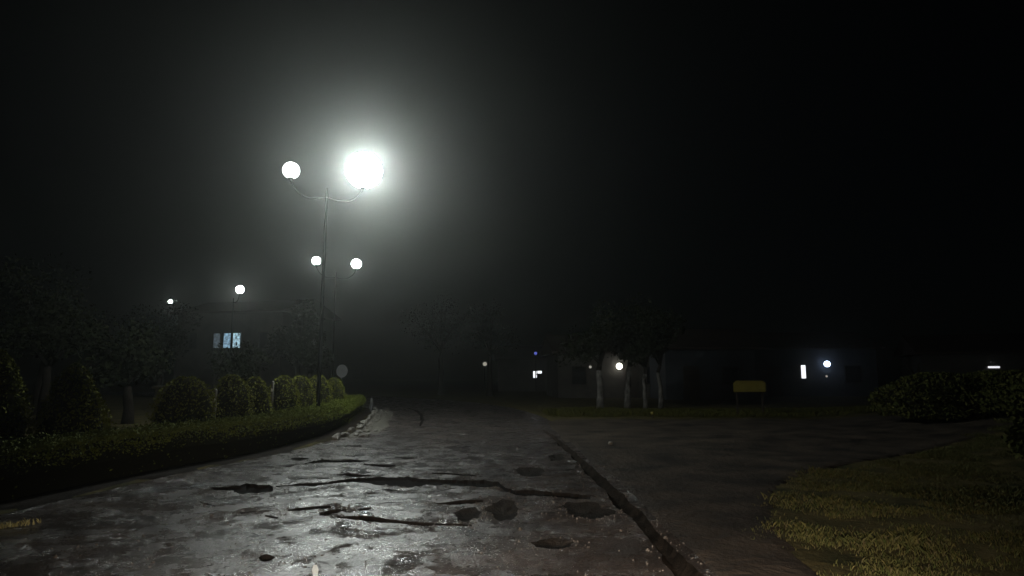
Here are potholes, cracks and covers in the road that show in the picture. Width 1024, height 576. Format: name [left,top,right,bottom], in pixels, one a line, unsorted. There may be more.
pothole [530,538,574,549]
crack [241,445,590,526]
pothole [454,507,481,521]
pothole [515,467,544,477]
pothole [562,501,616,519]
crack [407,408,424,426]
pothole [485,499,519,521]
pothole [208,483,273,494]
